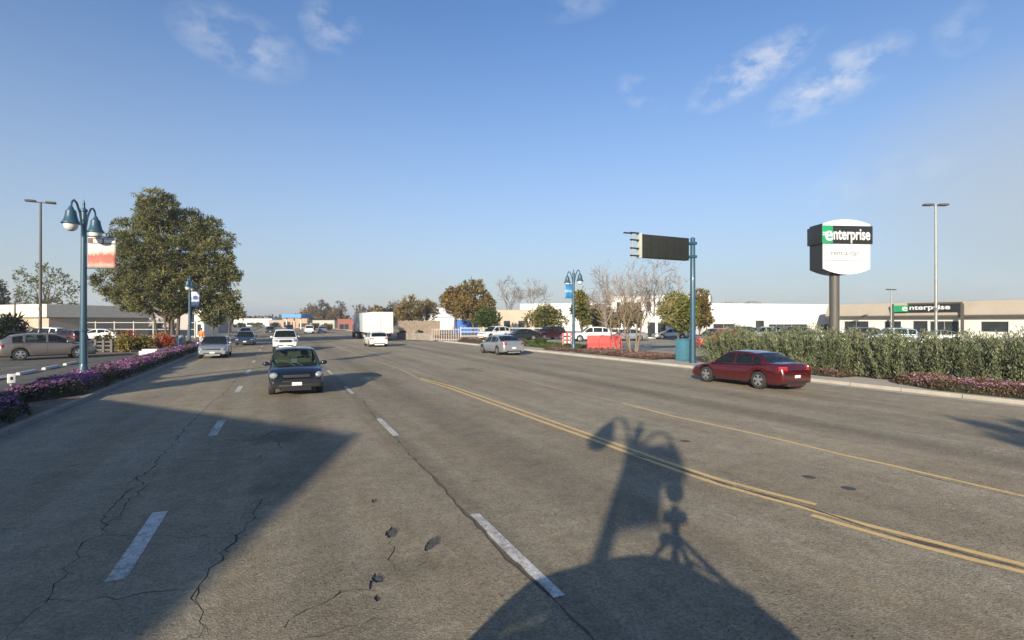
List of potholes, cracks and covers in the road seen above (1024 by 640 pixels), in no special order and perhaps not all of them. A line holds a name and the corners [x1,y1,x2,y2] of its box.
pothole [385,526,400,538]
pothole [424,535,442,551]
crack [6,373,282,640]
crack [284,538,488,640]
pothole [371,571,386,583]
